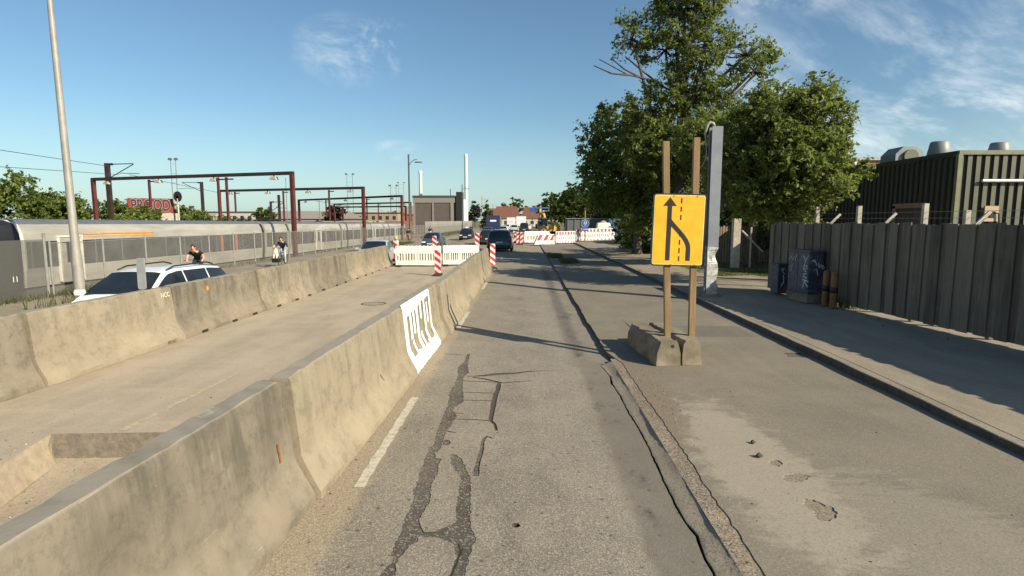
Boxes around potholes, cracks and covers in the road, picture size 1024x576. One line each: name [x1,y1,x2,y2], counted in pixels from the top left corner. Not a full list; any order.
pothole [781,473,811,482]
pothole [802,498,838,521]
